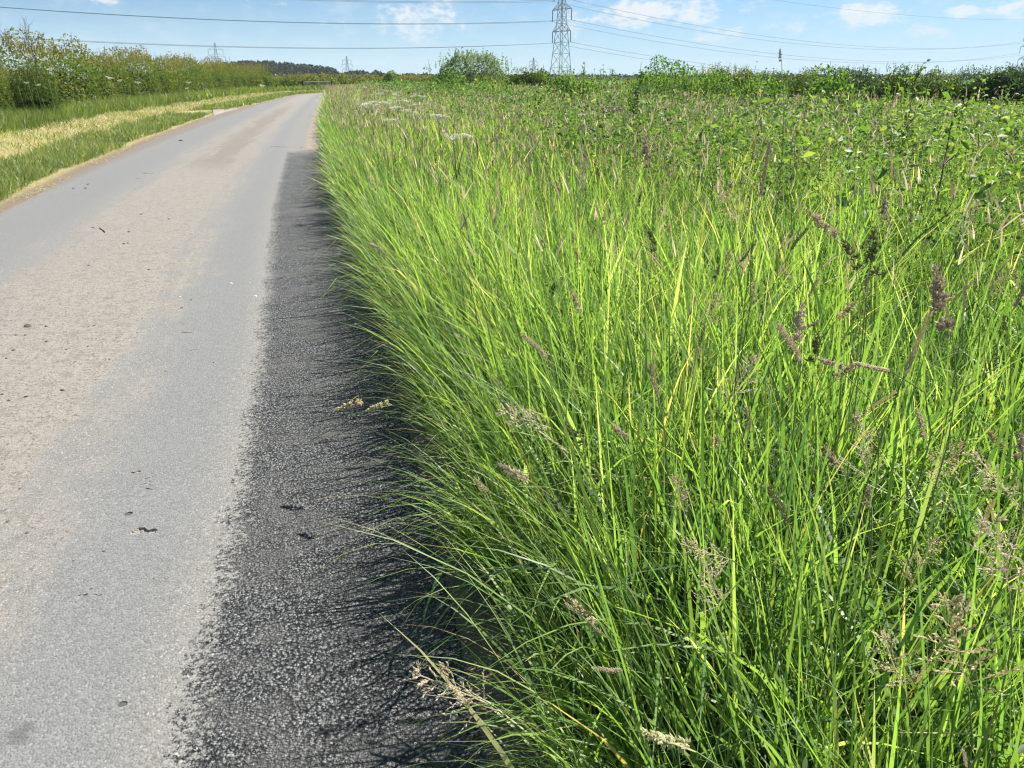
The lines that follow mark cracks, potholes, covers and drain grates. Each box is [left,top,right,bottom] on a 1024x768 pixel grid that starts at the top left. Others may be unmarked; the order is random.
pothole [126,527,158,535]
